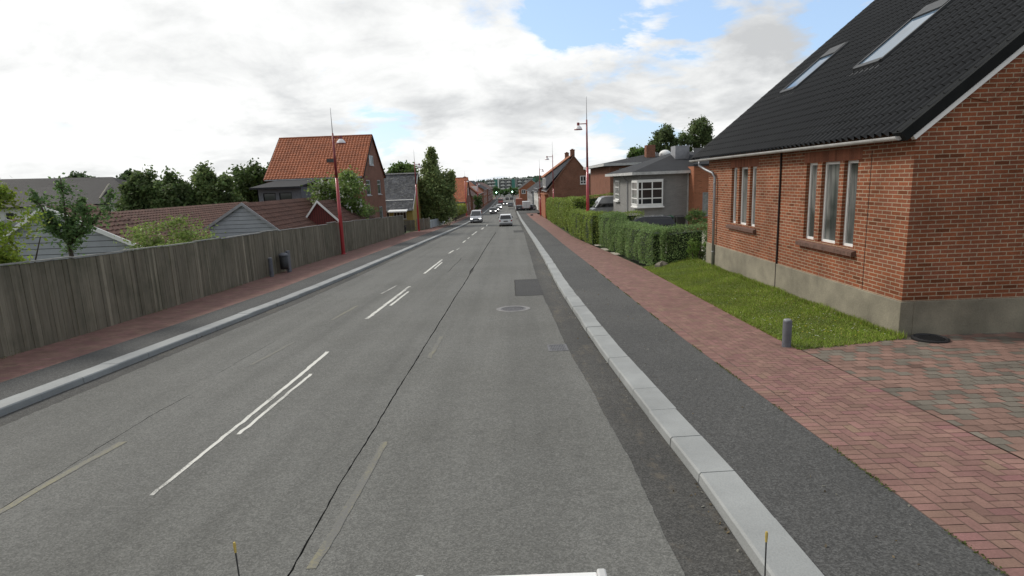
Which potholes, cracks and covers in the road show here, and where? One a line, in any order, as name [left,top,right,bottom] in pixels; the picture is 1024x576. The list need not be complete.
crack [219,234,495,576]
manhole cover [911,333,951,344]
